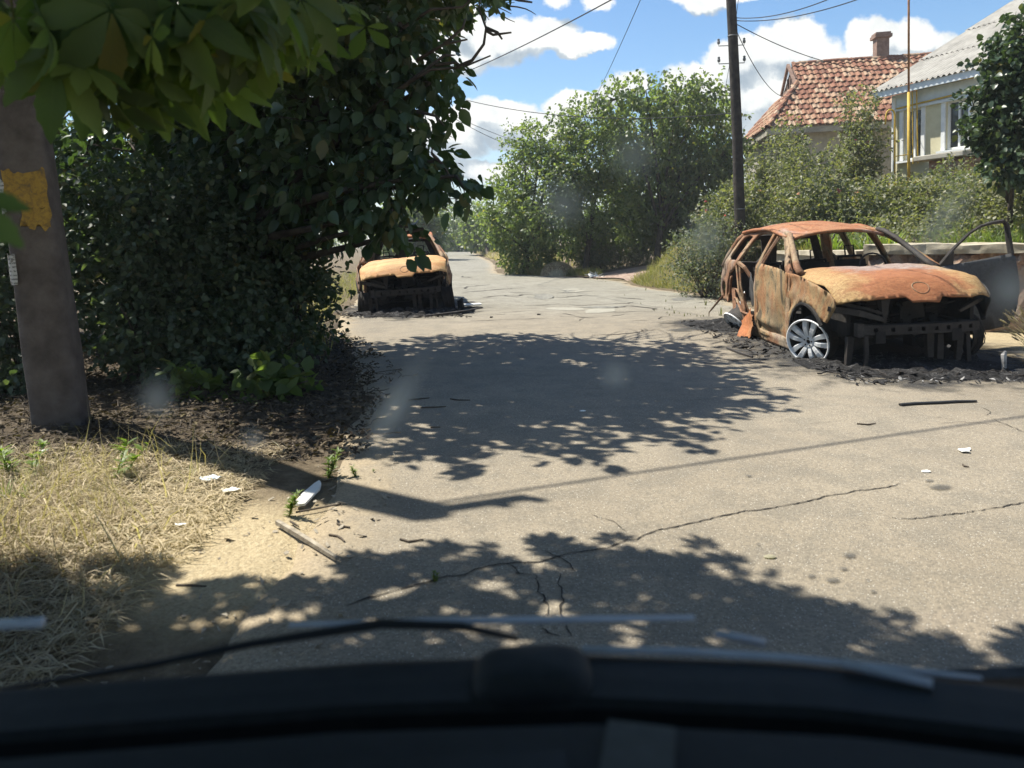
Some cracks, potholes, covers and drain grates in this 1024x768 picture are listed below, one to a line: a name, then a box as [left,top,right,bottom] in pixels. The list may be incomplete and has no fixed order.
crack [909,502,1023,519]
crack [345,484,897,637]
crack [461,276,679,335]
